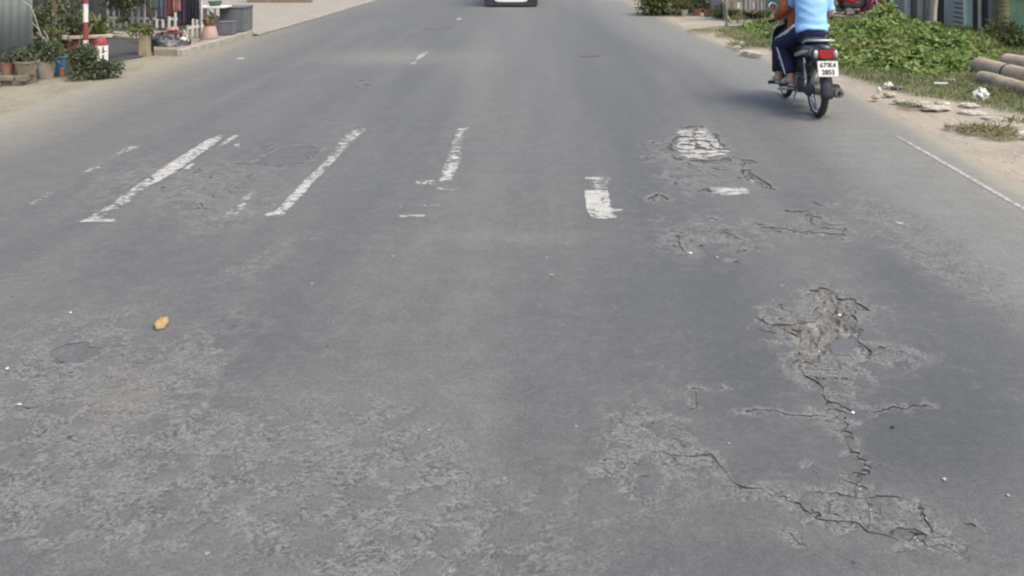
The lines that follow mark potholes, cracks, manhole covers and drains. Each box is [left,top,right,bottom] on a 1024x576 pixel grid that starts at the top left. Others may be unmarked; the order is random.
pothole [647,194,668,202]
pothole [770,287,872,370]
crack [657,200,848,263]
crack [603,304,977,558]
crack [641,126,757,194]
